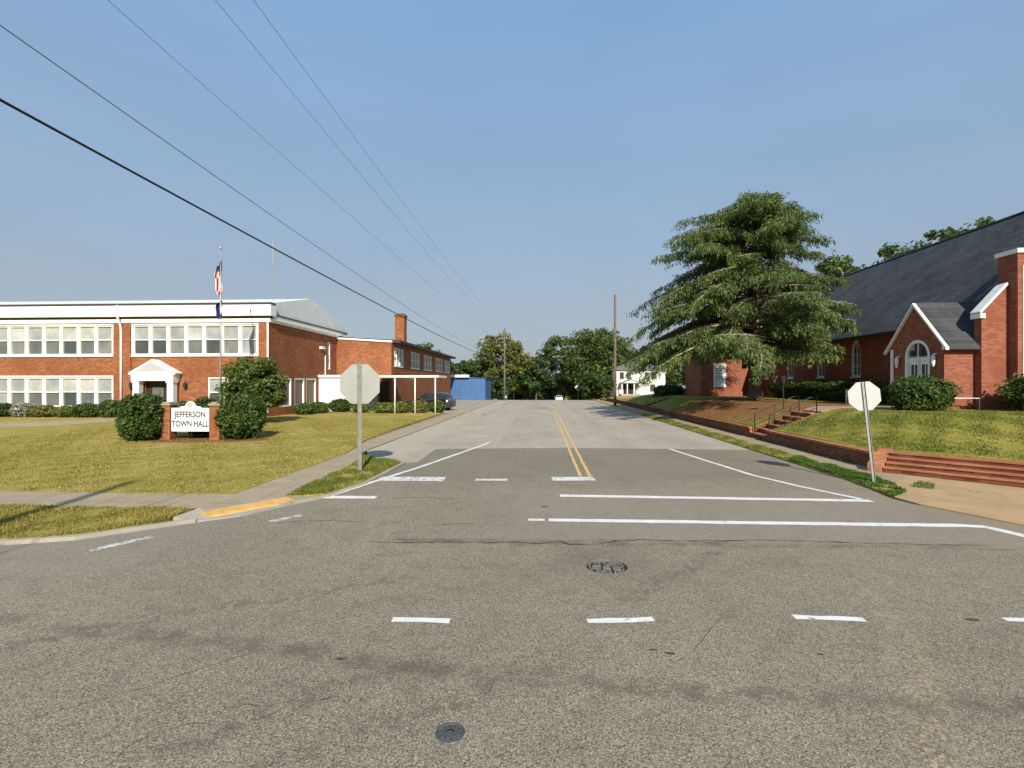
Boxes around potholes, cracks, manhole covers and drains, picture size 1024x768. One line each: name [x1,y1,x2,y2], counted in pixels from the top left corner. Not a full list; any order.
manhole cover [435,722,466,743]
manhole cover [585,559,629,574]
